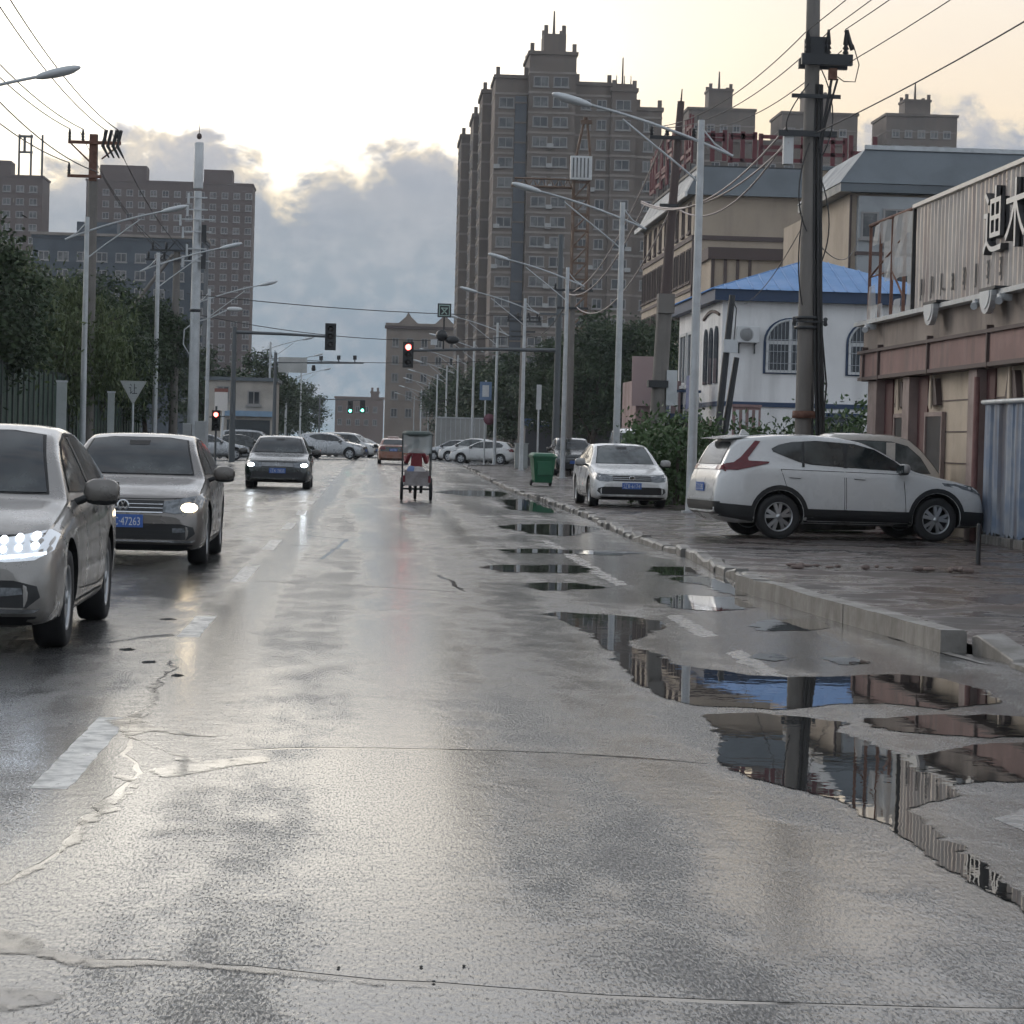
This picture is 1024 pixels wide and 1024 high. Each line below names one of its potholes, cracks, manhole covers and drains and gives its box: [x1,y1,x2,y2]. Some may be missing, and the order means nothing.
crack [260,575,465,592]
crack [0,634,179,886]
